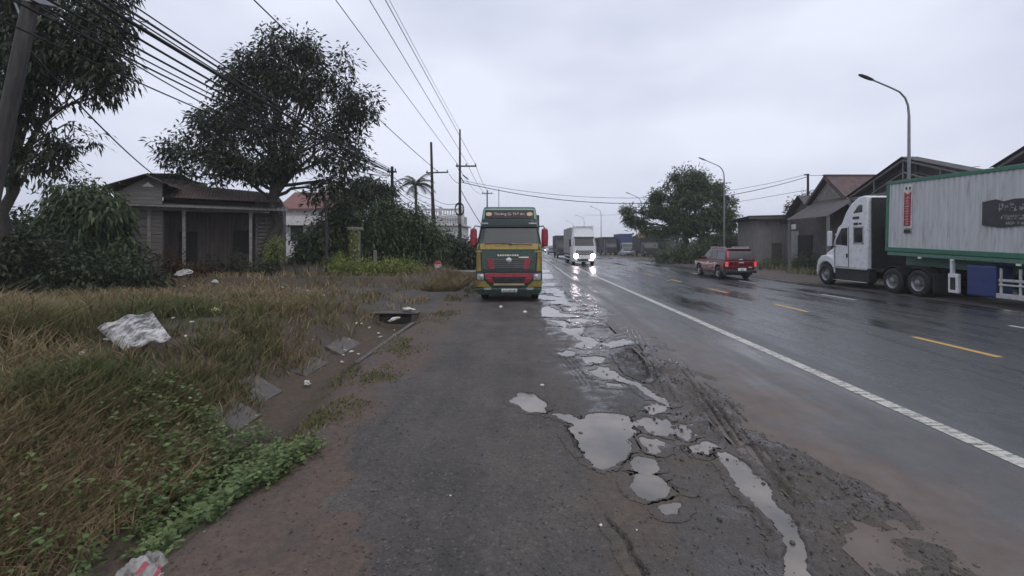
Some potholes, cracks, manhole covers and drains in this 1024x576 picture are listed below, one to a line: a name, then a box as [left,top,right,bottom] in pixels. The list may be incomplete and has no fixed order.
pothole [563,410,640,474]
pothole [616,472,680,505]
